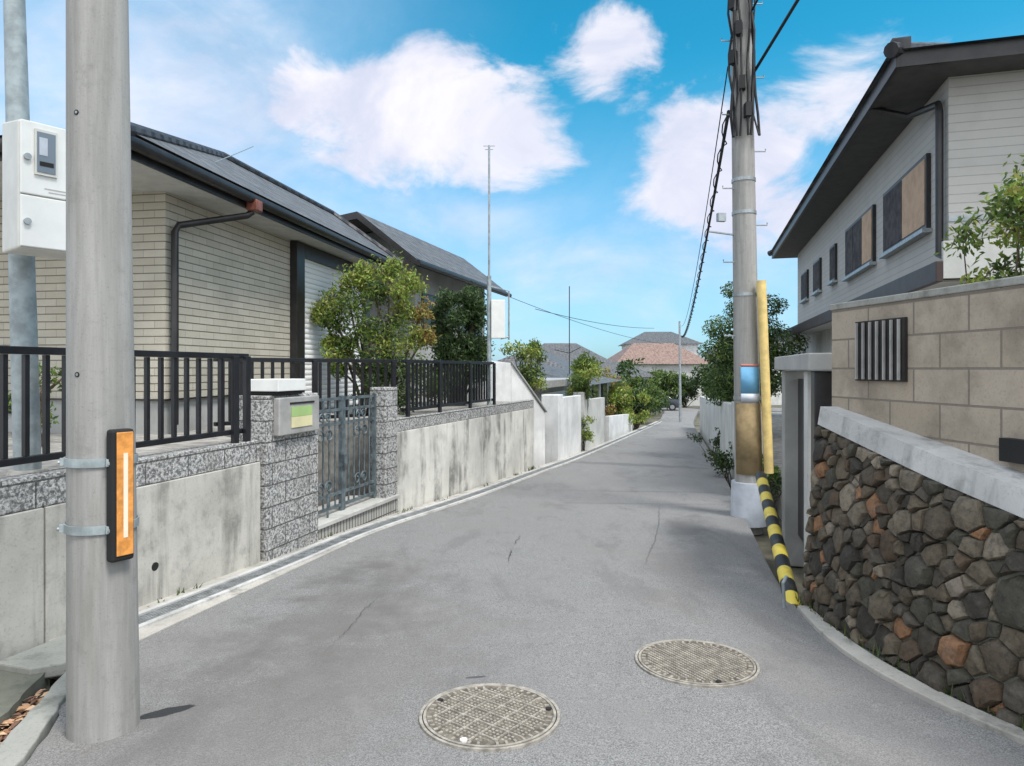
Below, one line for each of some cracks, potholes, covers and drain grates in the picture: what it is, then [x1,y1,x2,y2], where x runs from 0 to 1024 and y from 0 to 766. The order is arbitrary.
manhole cover [635,639,760,688]
manhole cover [419,683,560,752]
